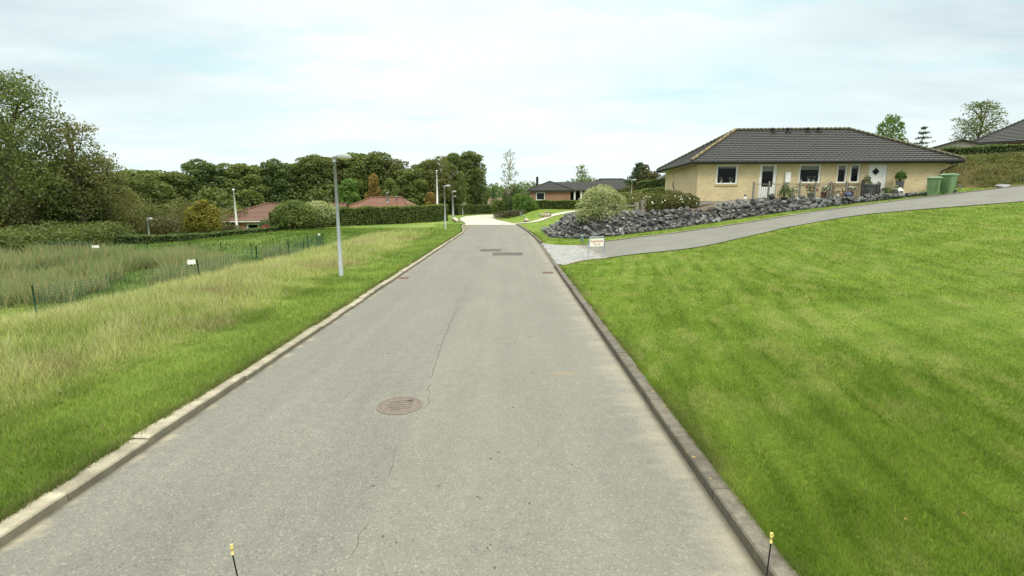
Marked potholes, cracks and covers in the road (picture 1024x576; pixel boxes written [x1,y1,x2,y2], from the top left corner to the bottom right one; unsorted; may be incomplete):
manhole cover [376,396,423,415]
crack [418,309,457,412]
